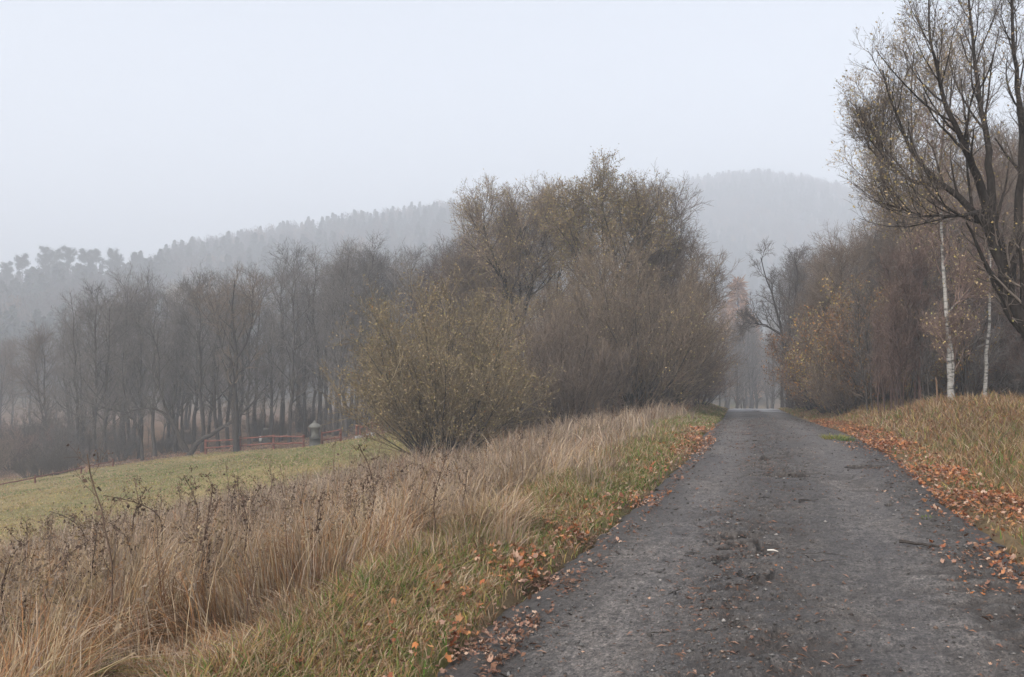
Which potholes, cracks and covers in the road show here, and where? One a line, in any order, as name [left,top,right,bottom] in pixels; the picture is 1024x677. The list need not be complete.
pothole [703,531,777,565]
